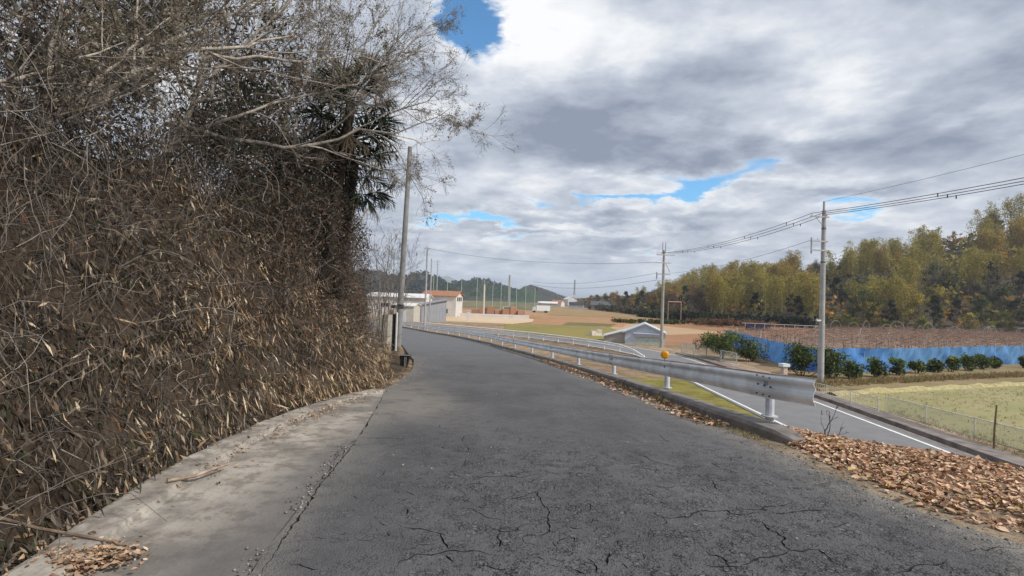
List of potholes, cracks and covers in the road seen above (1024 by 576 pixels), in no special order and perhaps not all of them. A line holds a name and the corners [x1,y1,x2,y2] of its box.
crack [885,559,947,574]
crack [363,437,645,574]
crack [260,438,358,574]
crack [624,439,855,572]
